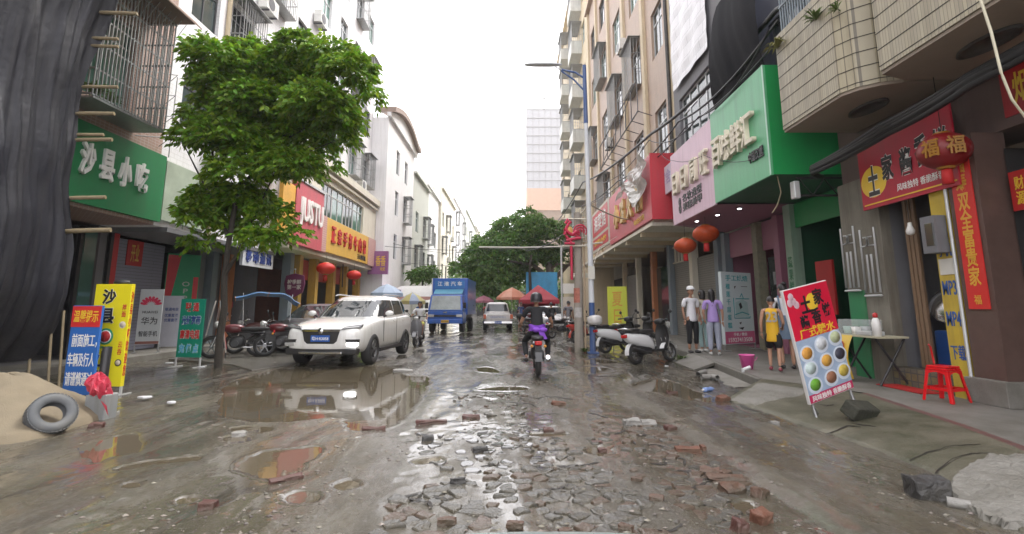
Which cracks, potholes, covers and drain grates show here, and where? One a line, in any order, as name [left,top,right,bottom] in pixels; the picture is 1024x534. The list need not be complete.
pothole [66,431,152,465]
pothole [324,476,369,493]
pothole [403,454,451,466]
crack [909,444,979,474]
pothole [227,444,331,483]
pothole [580,433,640,457]
pothole [273,487,331,507]
